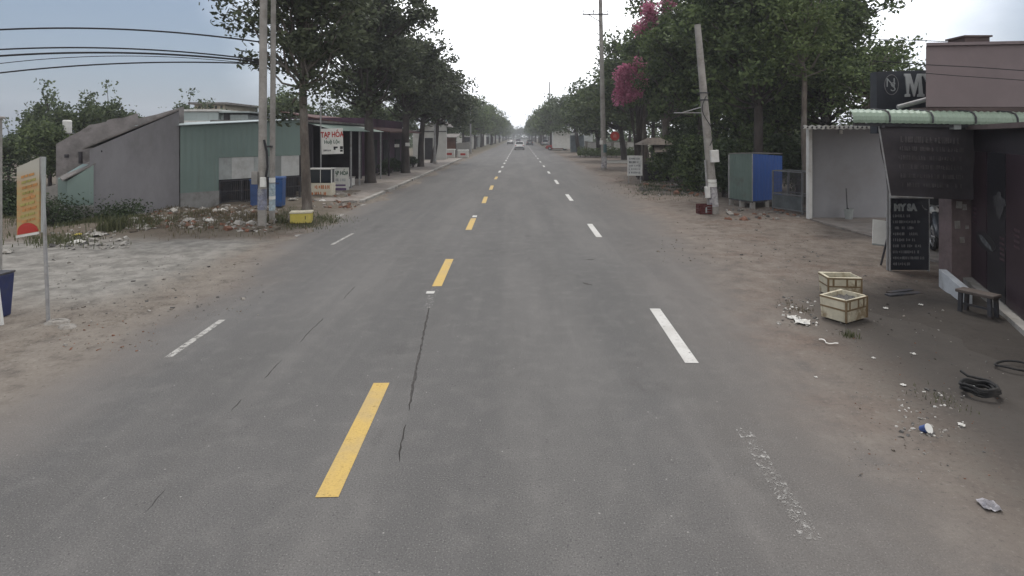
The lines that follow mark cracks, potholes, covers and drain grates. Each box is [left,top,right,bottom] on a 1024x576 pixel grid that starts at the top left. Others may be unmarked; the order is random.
crack [398,309,429,461]
